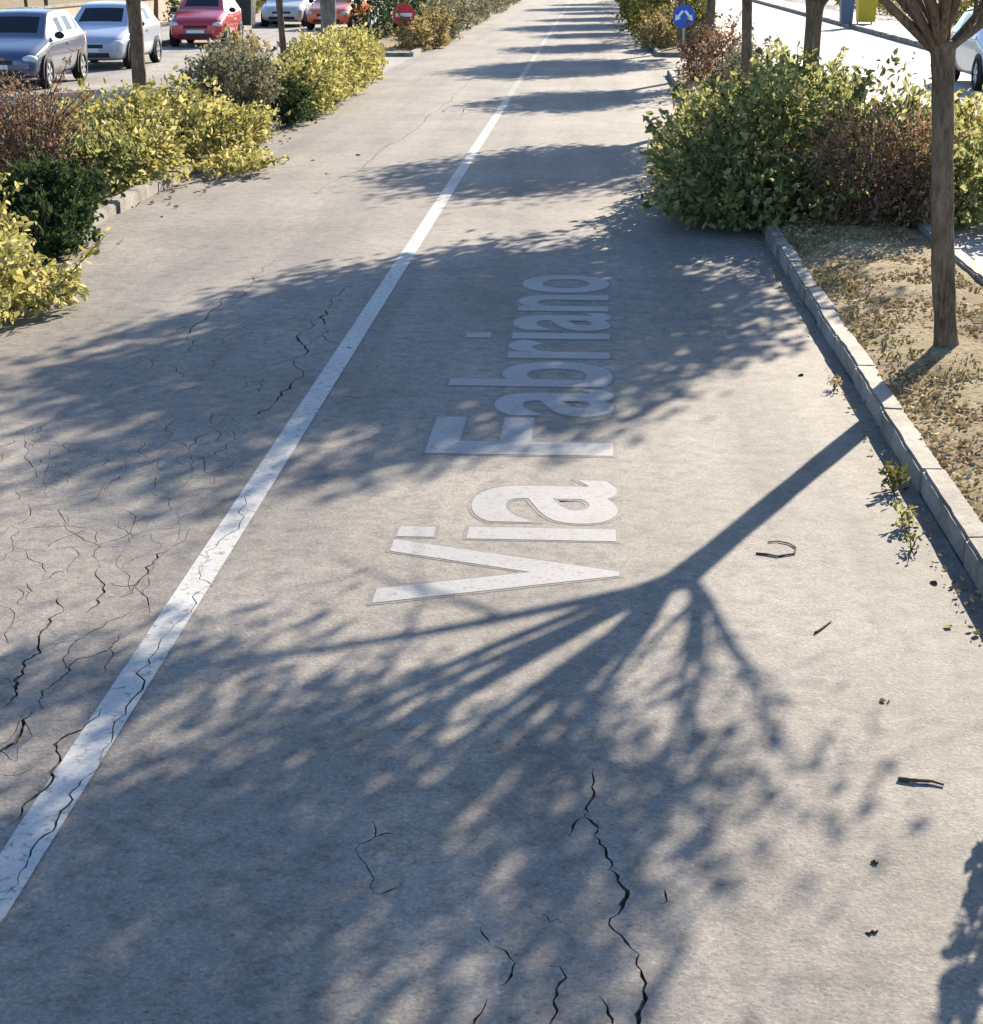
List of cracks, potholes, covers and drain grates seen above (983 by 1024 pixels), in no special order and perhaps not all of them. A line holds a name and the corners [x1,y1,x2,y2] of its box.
crack [0,259,350,877]
crack [549,770,668,1024]
crack [472,929,515,1024]
crack [355,822,397,894]
crack [316,75,478,194]
